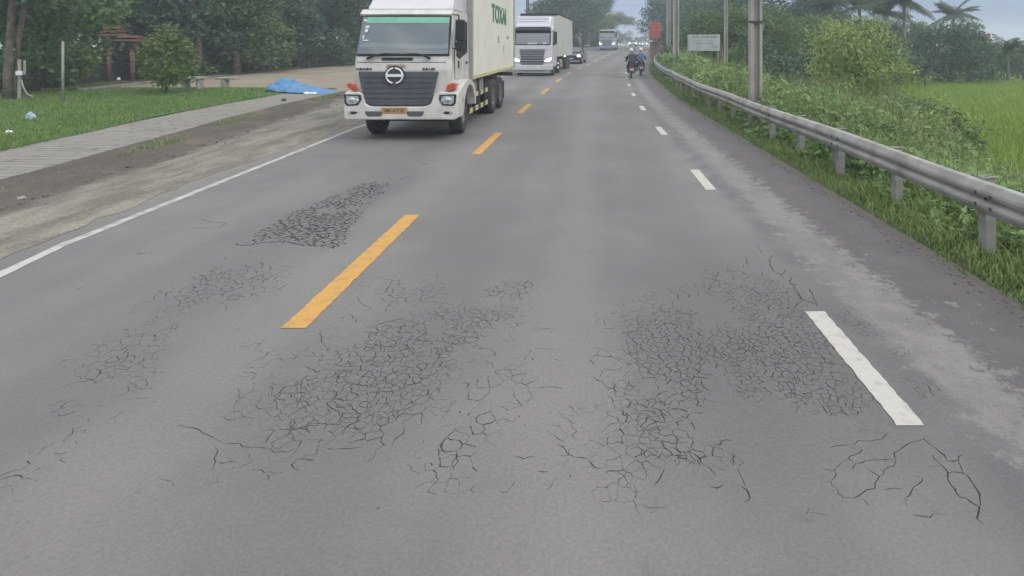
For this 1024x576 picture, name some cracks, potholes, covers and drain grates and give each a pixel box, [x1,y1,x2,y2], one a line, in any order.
crack [1,249,296,491]
crack [557,265,873,523]
crack [745,245,818,307]
crack [807,424,982,523]
